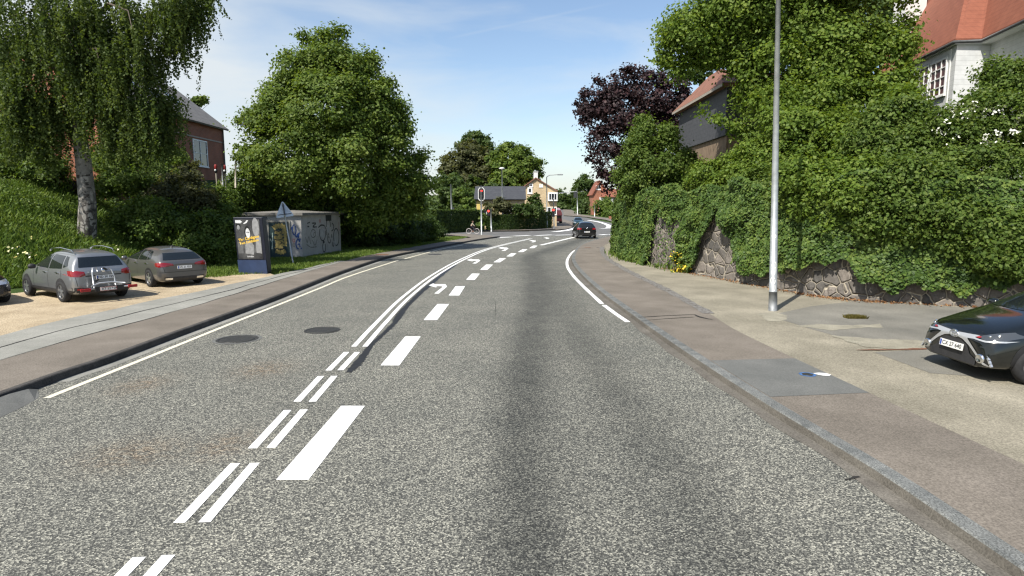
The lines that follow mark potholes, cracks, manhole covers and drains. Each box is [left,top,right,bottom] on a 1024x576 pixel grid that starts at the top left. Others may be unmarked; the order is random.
manhole cover [212,334,262,344]
